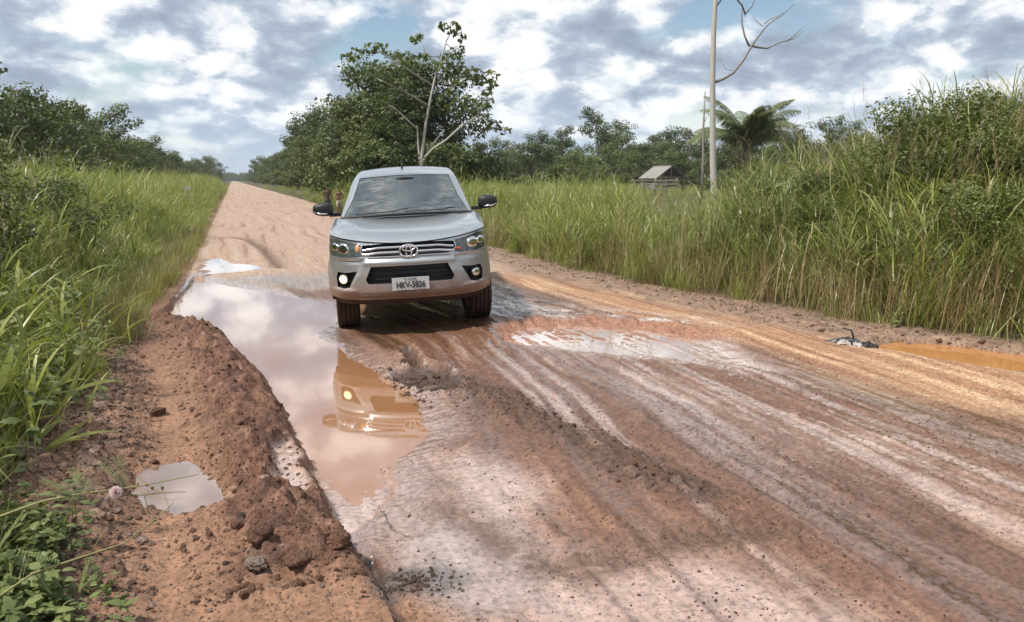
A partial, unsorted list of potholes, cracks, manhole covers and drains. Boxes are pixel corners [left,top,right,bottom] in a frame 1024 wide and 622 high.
pothole [120,451,245,516]
pothole [194,256,275,275]
pothole [865,334,1024,372]
pothole [156,274,439,539]
